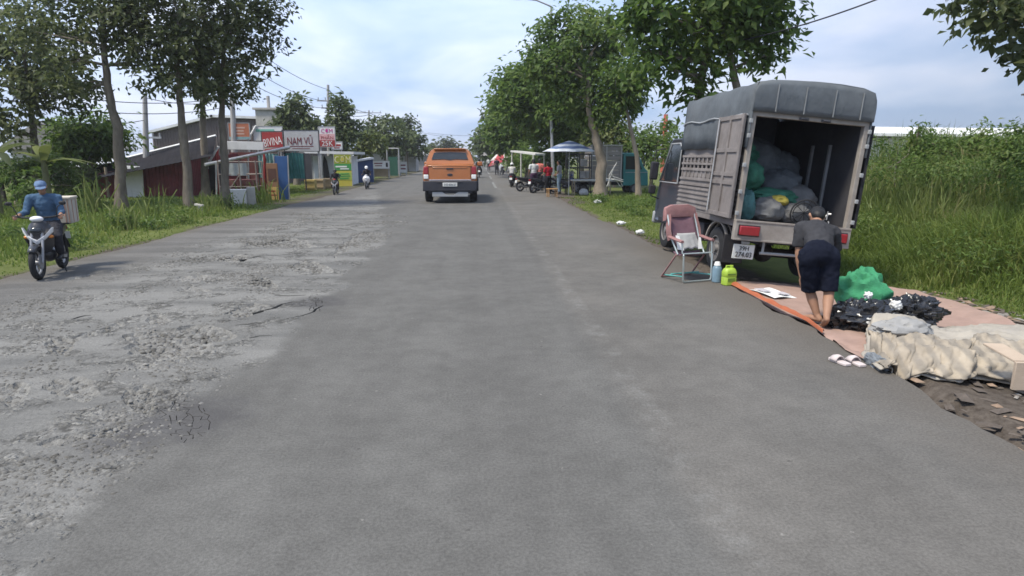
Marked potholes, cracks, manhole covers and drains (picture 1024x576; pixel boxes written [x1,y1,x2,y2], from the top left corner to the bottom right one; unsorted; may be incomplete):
pothole [122,324,237,364]
pothole [121,384,158,415]
crack [157,400,211,443]
crack [241,294,323,338]
